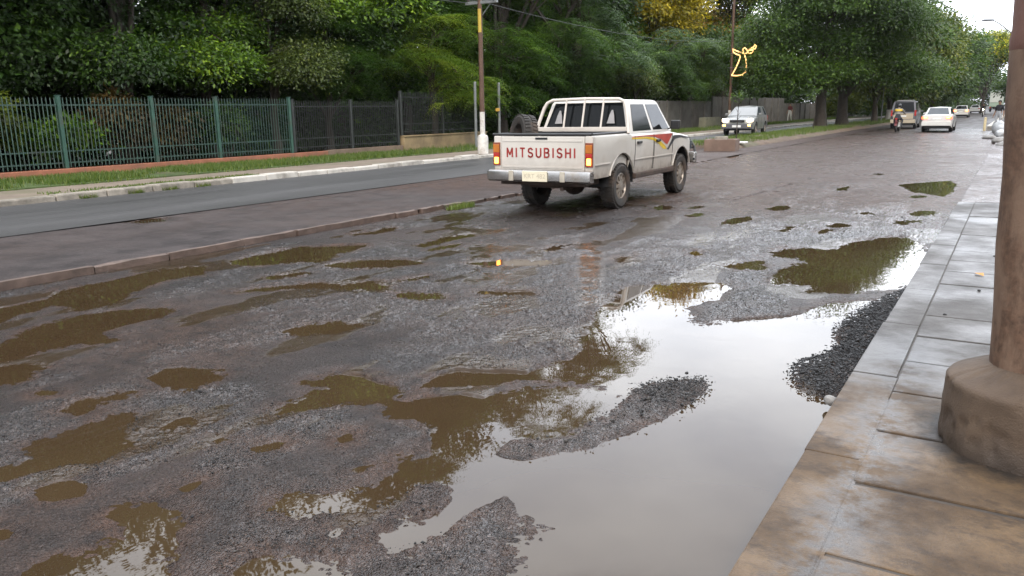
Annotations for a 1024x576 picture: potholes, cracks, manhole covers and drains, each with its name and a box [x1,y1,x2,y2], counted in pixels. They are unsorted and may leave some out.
pothole [759,233,928,294]
pothole [143,365,228,394]
pothole [320,258,427,269]
pothole [260,282,899,576]
pothole [0,412,145,482]
pothole [0,307,178,363]
pothole [29,477,93,504]
pothole [897,181,958,197]
